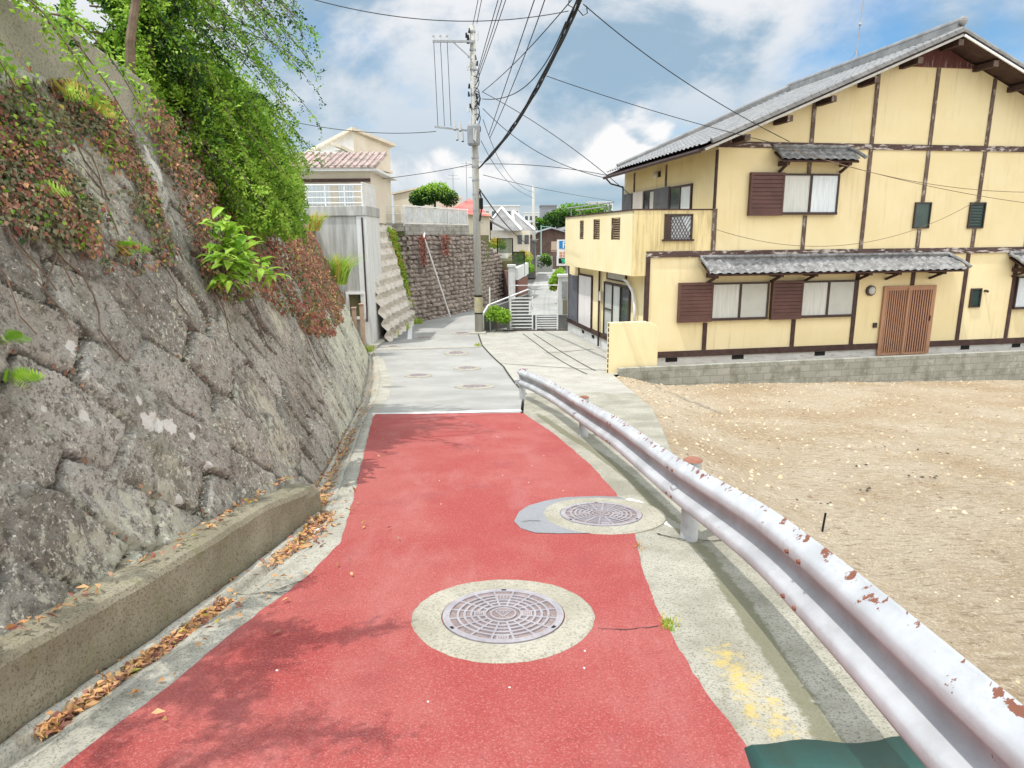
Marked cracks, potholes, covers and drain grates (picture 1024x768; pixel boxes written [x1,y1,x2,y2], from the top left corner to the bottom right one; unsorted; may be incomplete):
manhole cover [544,498,666,535]
manhole cover [411,579,595,664]
